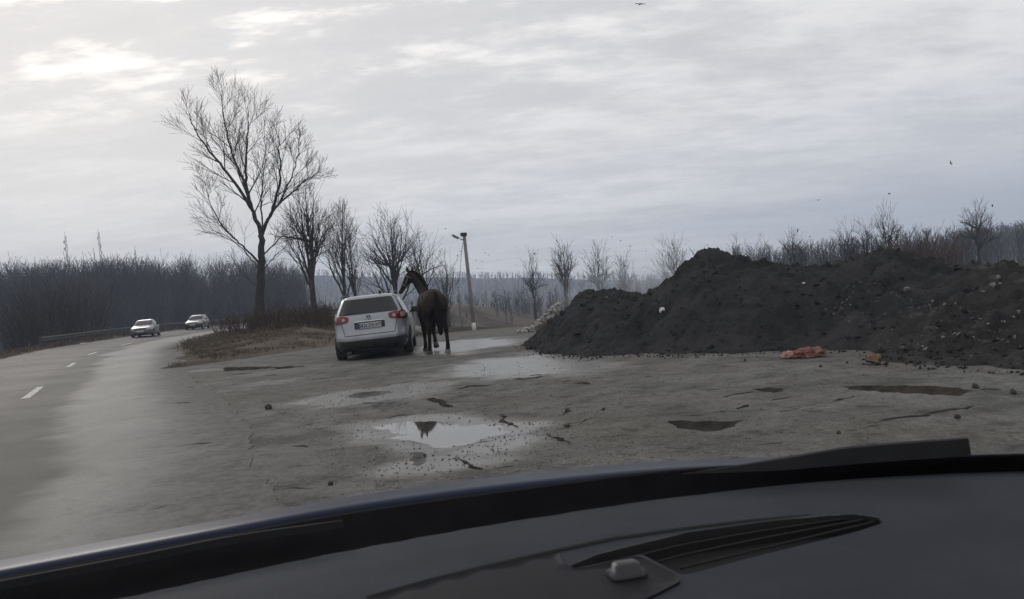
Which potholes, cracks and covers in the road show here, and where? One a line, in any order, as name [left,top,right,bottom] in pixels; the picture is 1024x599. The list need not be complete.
pothole [844,385,973,396]
pothole [427,398,453,407]
crack [862,388,1000,429]
pothole [667,420,742,432]
crack [452,414,519,470]
crack [546,404,597,446]
